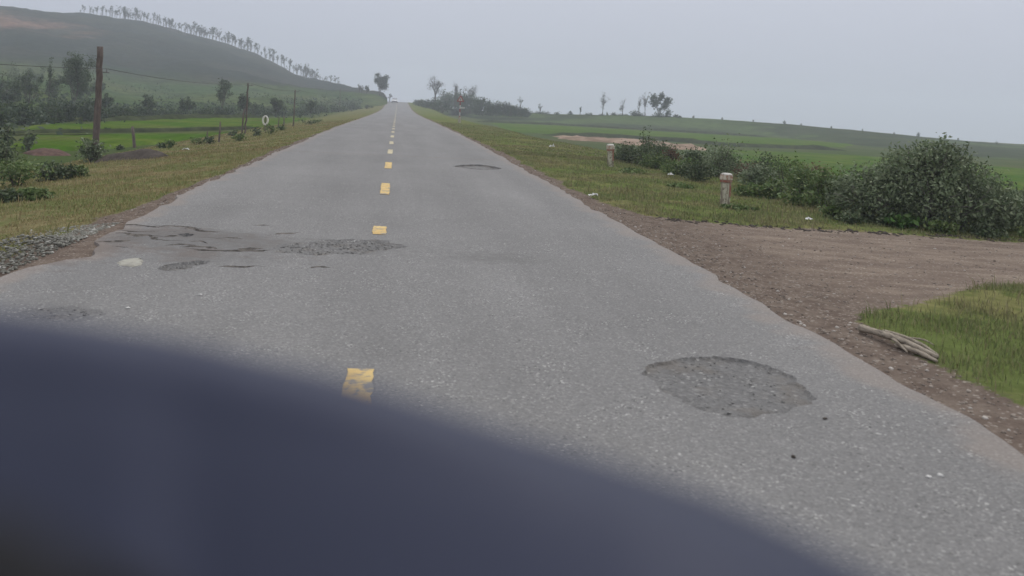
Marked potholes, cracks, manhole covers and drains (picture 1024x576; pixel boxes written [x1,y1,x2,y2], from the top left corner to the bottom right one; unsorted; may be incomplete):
pothole [157,260,210,271]
crack [98,224,295,268]
pothole [268,239,408,256]
pothole [641,356,817,418]
